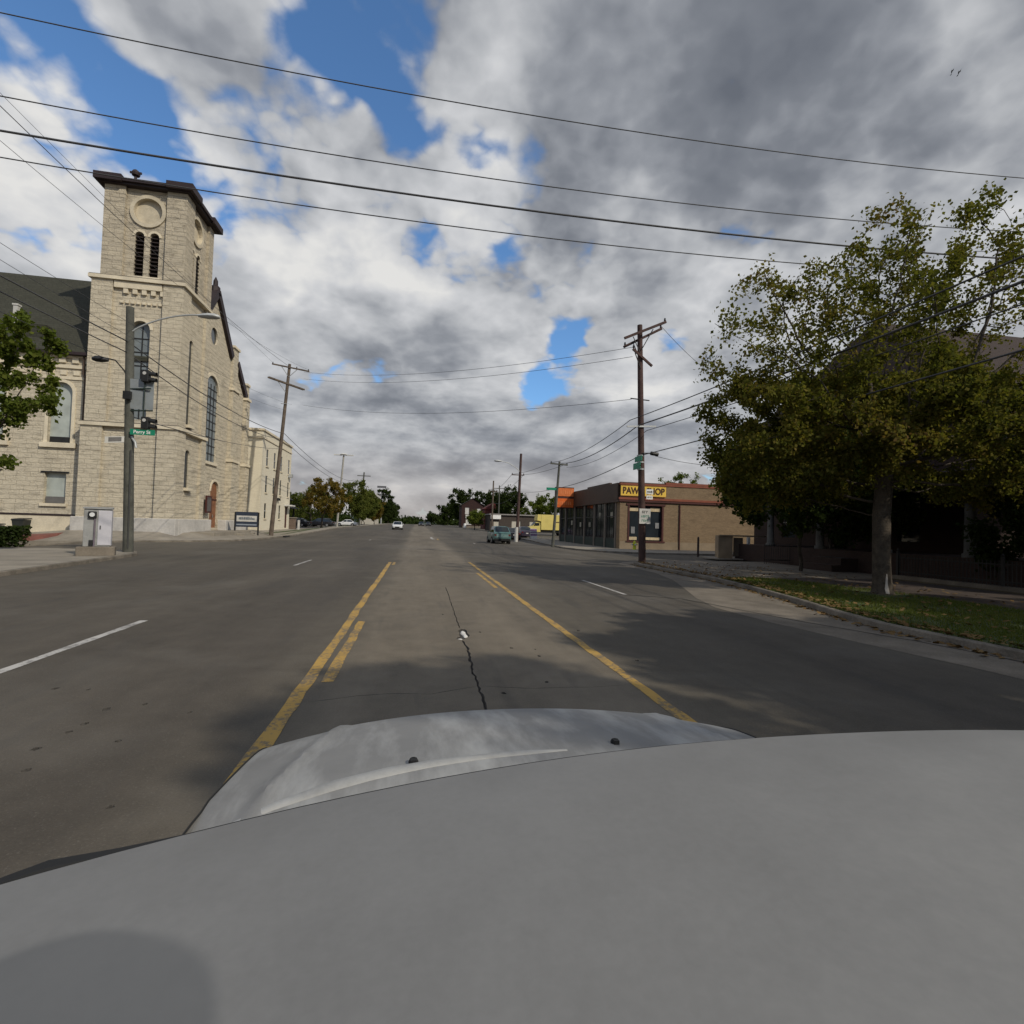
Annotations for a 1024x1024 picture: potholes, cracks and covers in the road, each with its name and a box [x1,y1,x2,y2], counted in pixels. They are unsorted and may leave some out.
crack [310,587,618,710]
